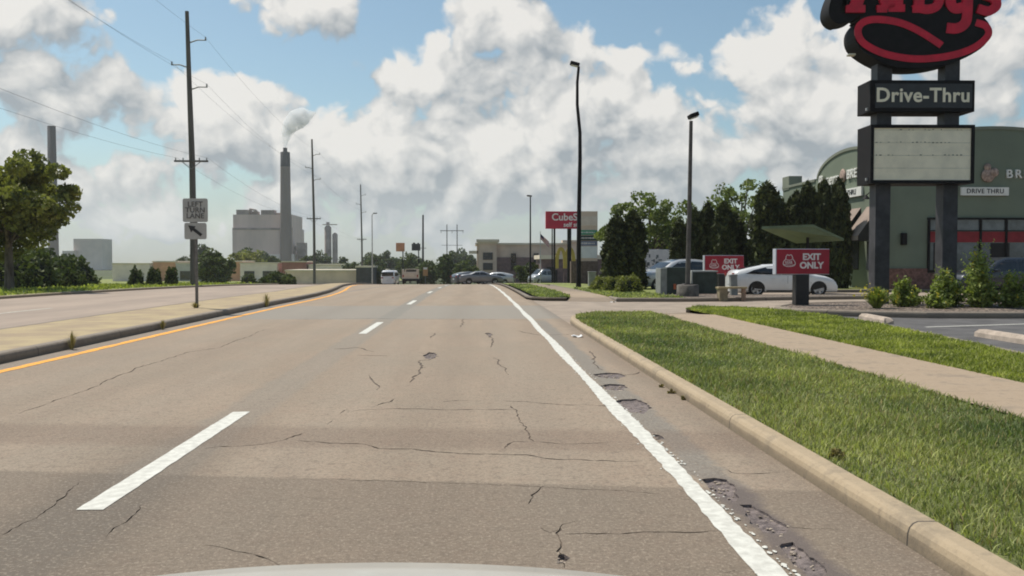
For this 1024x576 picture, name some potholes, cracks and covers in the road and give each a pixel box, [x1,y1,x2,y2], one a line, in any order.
crack [3,484,78,535]
pothole [740,505,790,537]
crack [206,377,634,462]
pothole [616,397,652,416]
pothole [776,542,827,576]
crack [410,333,436,382]
pothole [699,477,739,503]
pothole [601,383,628,391]
crack [26,331,259,411]
crack [341,479,708,568]
